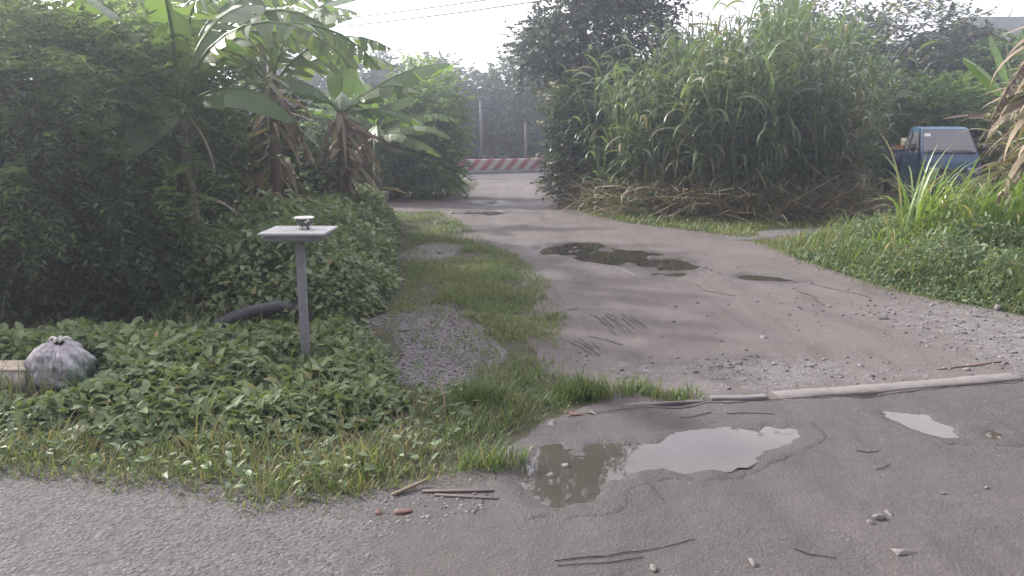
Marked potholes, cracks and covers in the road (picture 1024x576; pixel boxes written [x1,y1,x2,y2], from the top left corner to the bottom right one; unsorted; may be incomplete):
pothole [715,271,813,284]
pothole [853,407,985,446]
pothole [486,419,827,521]
pothole [534,241,708,279]
crack [555,539,694,566]
